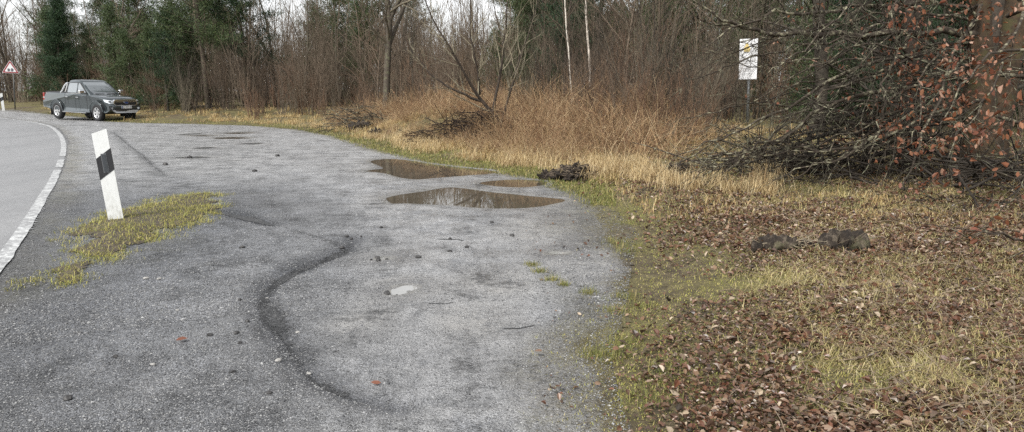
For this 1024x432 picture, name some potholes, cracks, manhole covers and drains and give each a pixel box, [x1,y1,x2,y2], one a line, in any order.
pothole [472,178,553,188]
pothole [360,158,500,180]
crack [224,213,386,405]
pothole [378,186,573,209]
